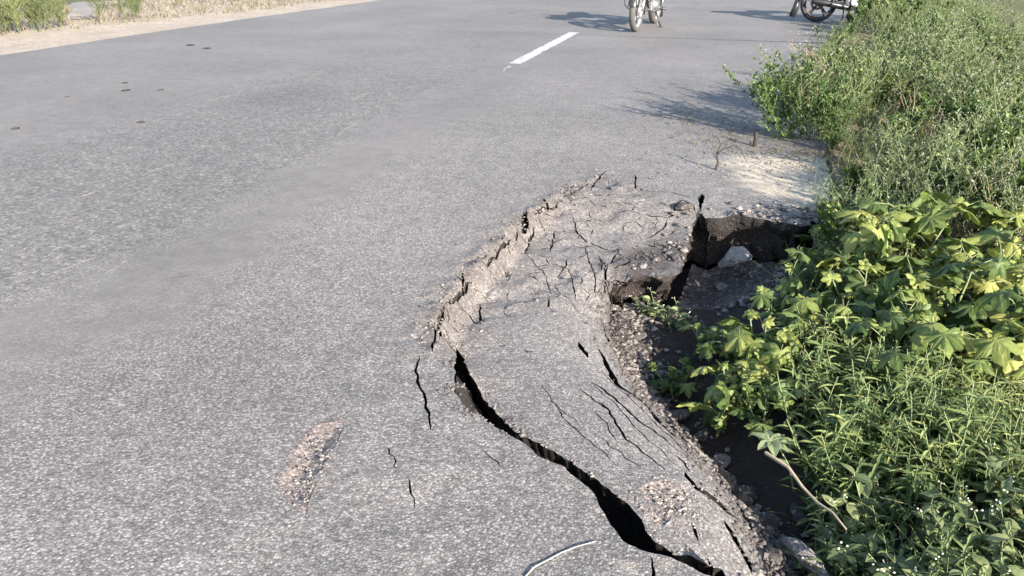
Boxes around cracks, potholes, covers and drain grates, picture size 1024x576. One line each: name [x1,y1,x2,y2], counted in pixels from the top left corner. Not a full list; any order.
crack [387,446,415,508]
pothole [611,212,821,310]
crack [414,171,753,576]
